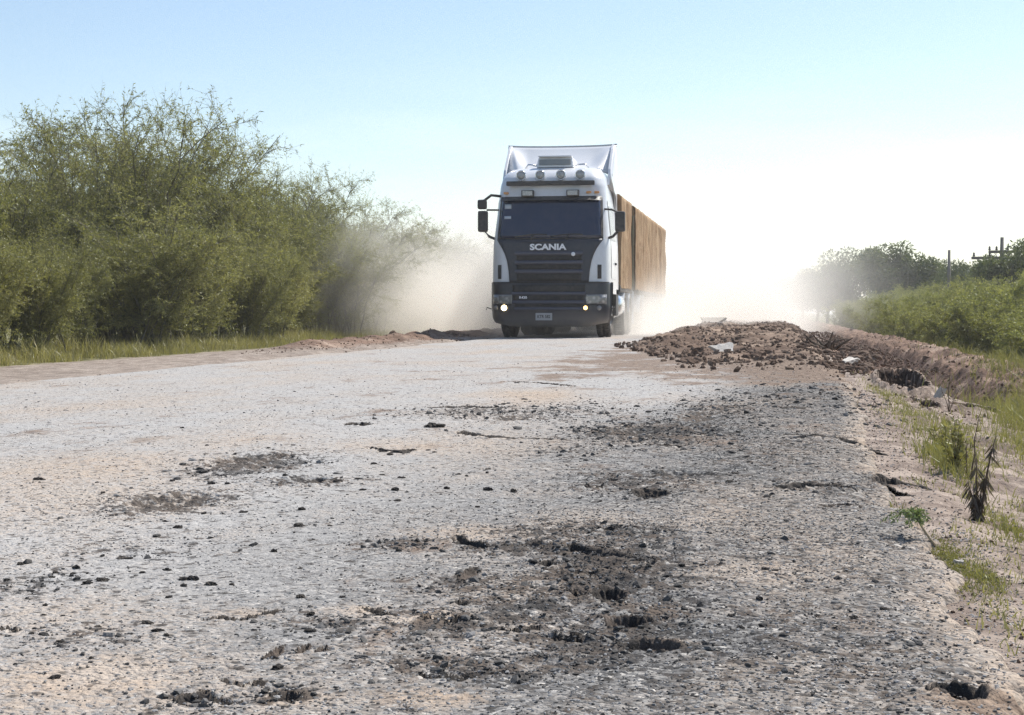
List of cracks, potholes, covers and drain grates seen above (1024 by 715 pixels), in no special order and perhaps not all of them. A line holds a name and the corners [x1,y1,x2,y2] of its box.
pothole [111,488,234,515]
crack [366,446,417,454]
pothole [617,636,688,653]
pothole [630,487,672,499]
pothole [925,679,993,701]
pothole [584,584,630,602]
pothole [191,450,304,469]
pothole [294,643,312,654]
pothole [601,614,661,630]
crack [776,482,863,508]
pothole [269,690,305,704]
crack [457,431,604,440]
